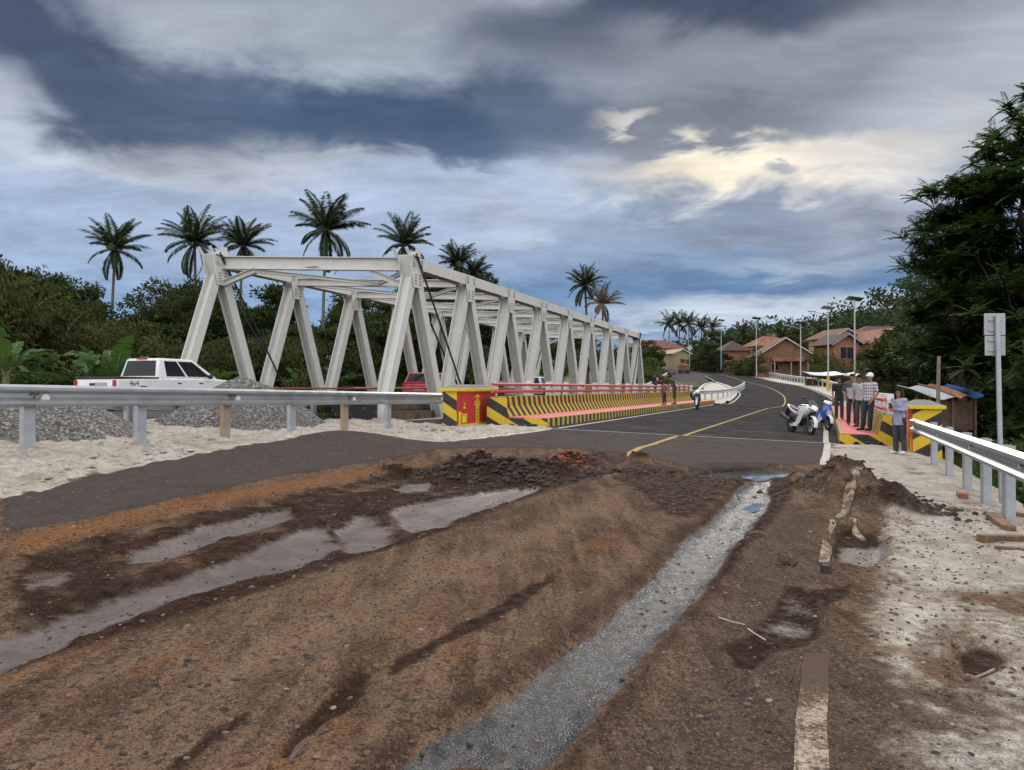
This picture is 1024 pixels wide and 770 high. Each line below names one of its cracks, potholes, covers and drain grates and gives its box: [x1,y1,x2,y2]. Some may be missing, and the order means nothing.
pothole [738,586,822,672]
pothole [0,523,342,677]
pothole [948,640,1018,678]
pothole [385,484,547,534]
pothole [118,504,307,565]
pothole [331,512,401,554]
pothole [827,523,891,567]
